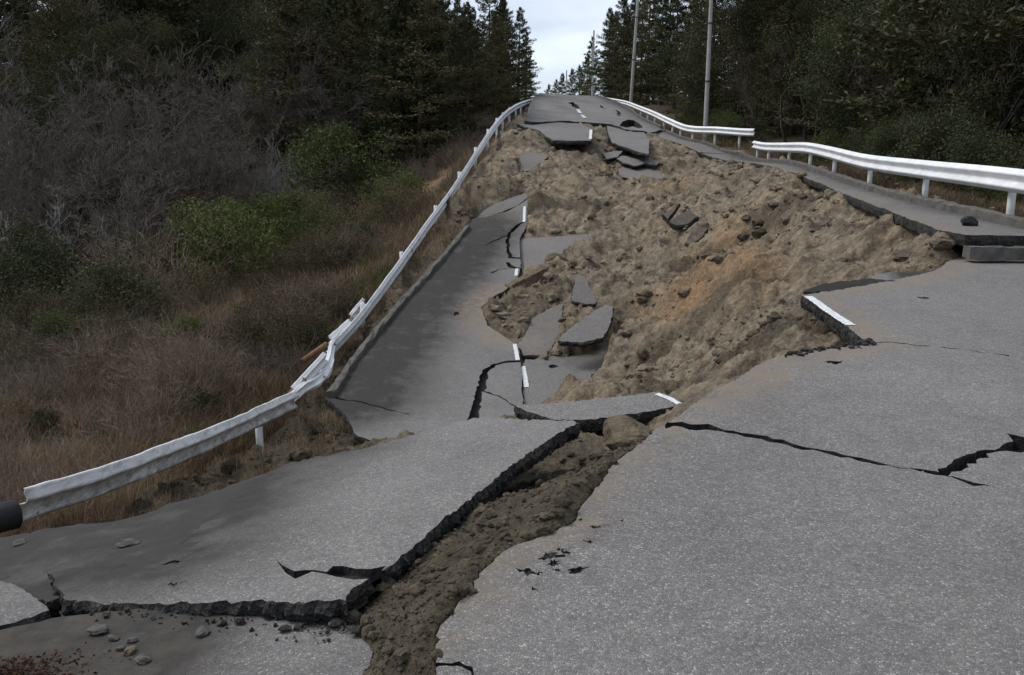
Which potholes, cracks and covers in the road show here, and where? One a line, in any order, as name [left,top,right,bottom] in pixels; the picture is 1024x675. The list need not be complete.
pothole [620,120,643,128]
crack [345,439,642,675]
crack [335,397,409,415]
crack [467,360,520,420]
crack [487,221,527,273]
crack [665,422,1024,487]
